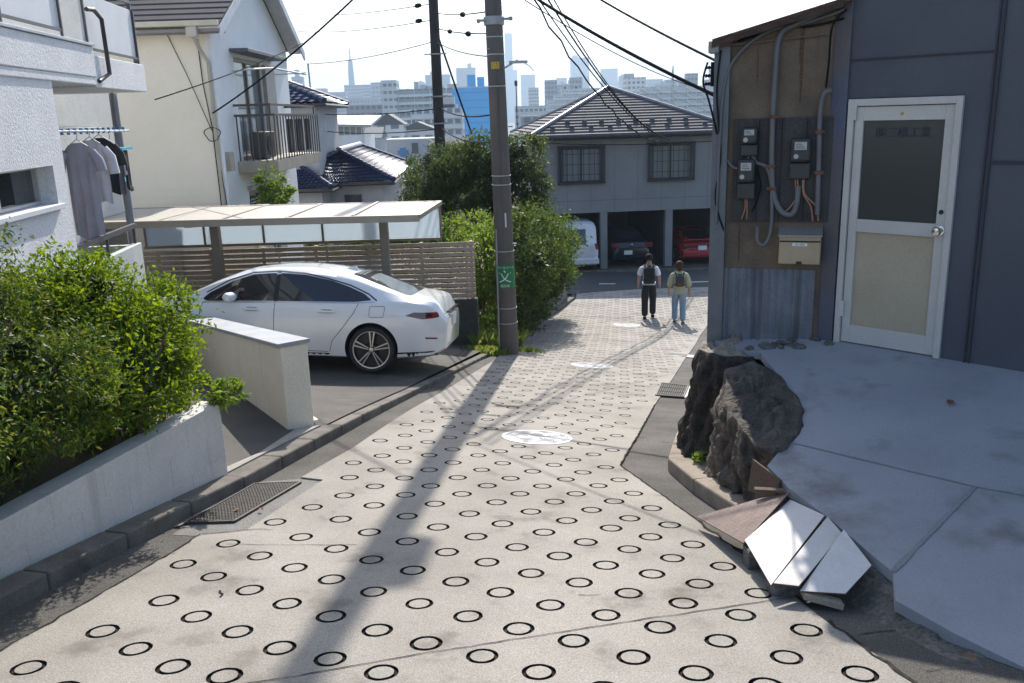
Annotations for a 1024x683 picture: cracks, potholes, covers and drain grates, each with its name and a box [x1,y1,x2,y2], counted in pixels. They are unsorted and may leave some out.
drain grate [185,481,302,525]
drain grate [655,382,689,399]
manhole cover [502,430,572,445]
